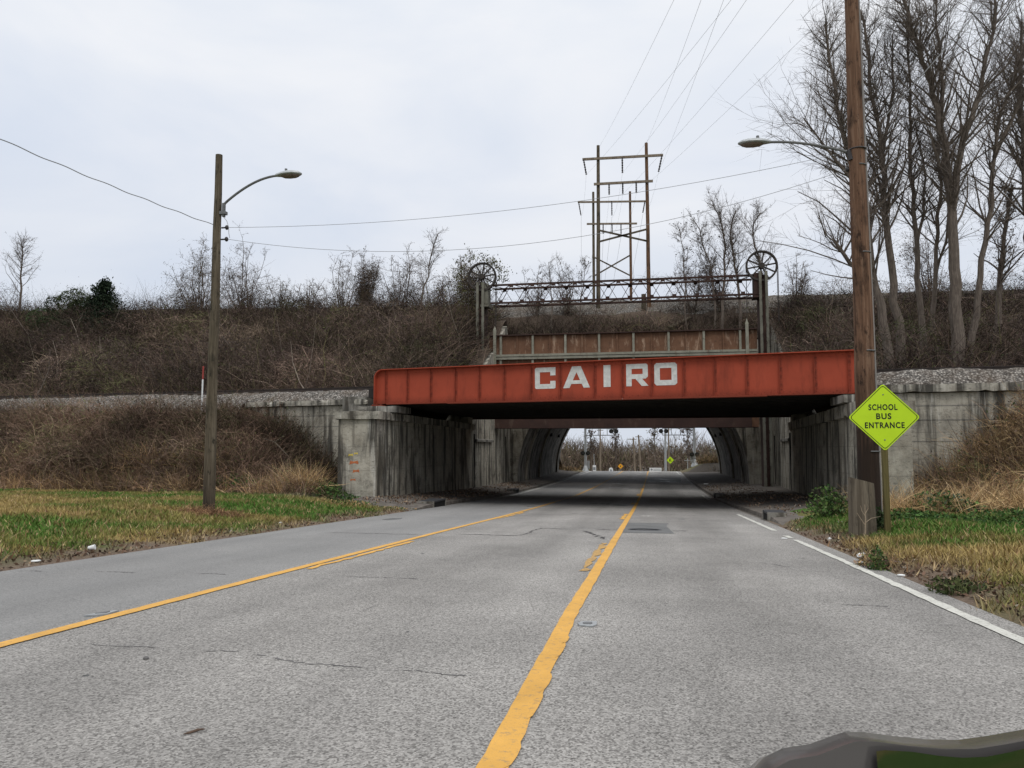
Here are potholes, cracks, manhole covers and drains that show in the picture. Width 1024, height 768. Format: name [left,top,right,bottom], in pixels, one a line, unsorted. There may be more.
crack [473,528,610,539]
crack [201,650,367,668]
